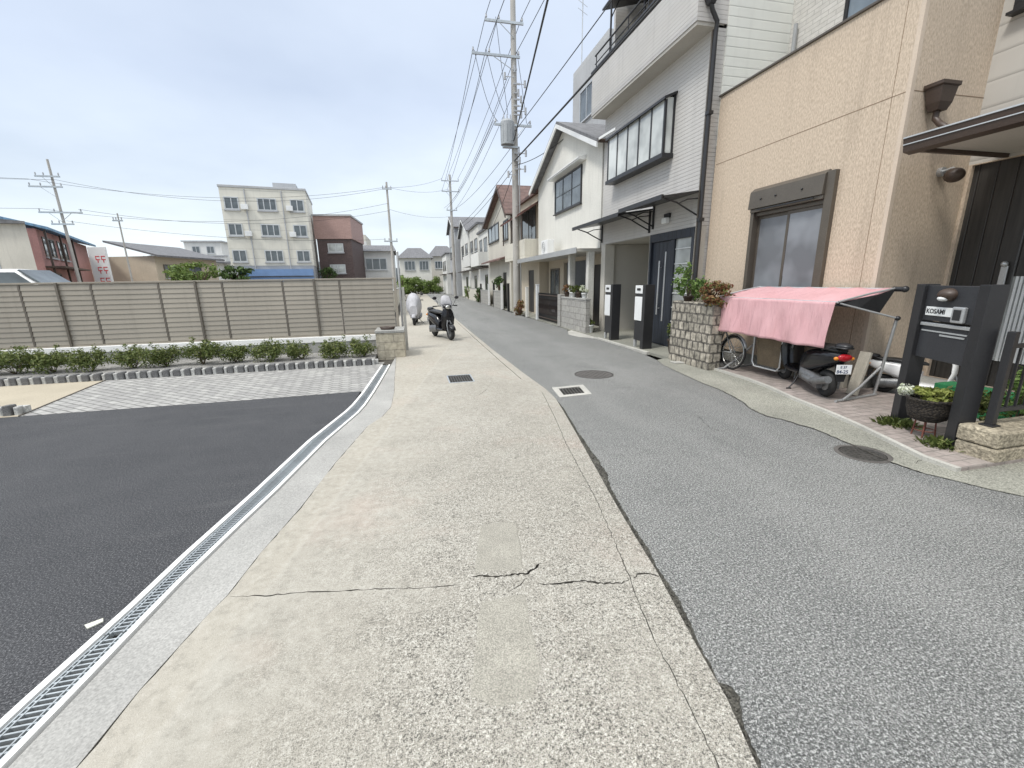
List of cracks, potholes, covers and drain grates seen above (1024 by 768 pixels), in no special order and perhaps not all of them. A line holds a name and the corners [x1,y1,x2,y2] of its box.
manhole cover [575,370,614,379]
manhole cover [833,445,893,464]
drain grate [552,385,591,398]
crack [232,563,659,597]
drain grate [447,374,475,383]
